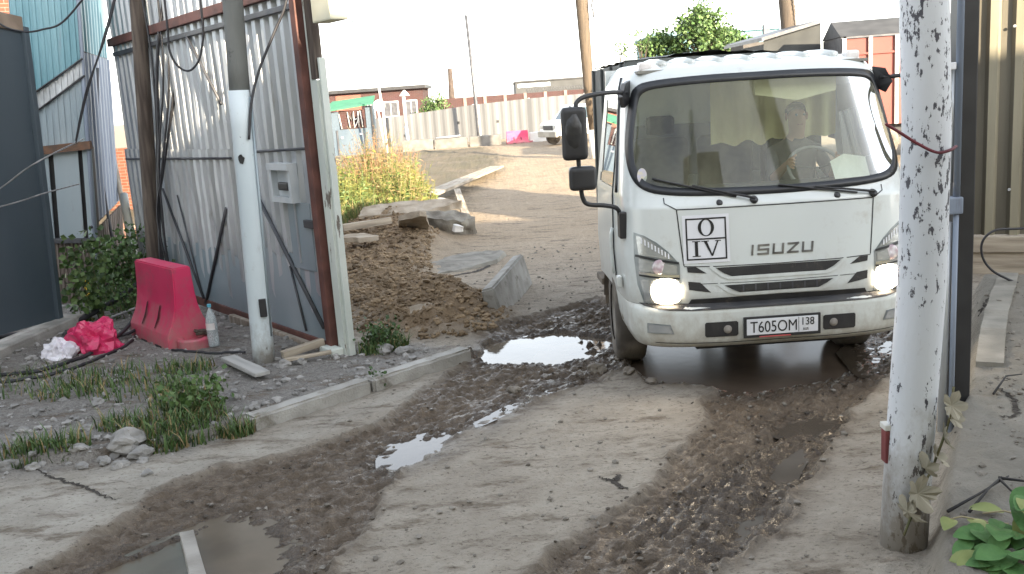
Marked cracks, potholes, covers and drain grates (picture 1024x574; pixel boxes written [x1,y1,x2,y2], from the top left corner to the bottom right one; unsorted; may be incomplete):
crack [36,468,120,500]
crack [999,388,1022,417]
pothole [471,327,613,367]
pothole [89,514,306,574]
